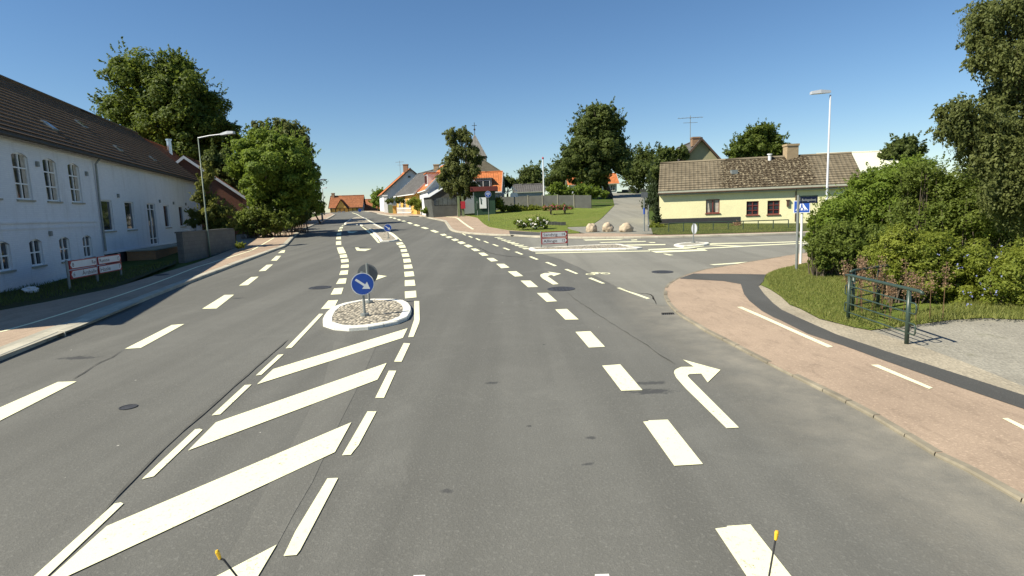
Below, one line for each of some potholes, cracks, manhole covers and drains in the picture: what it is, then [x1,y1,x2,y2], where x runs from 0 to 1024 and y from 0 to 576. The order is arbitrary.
crack [568,293,673,363]
